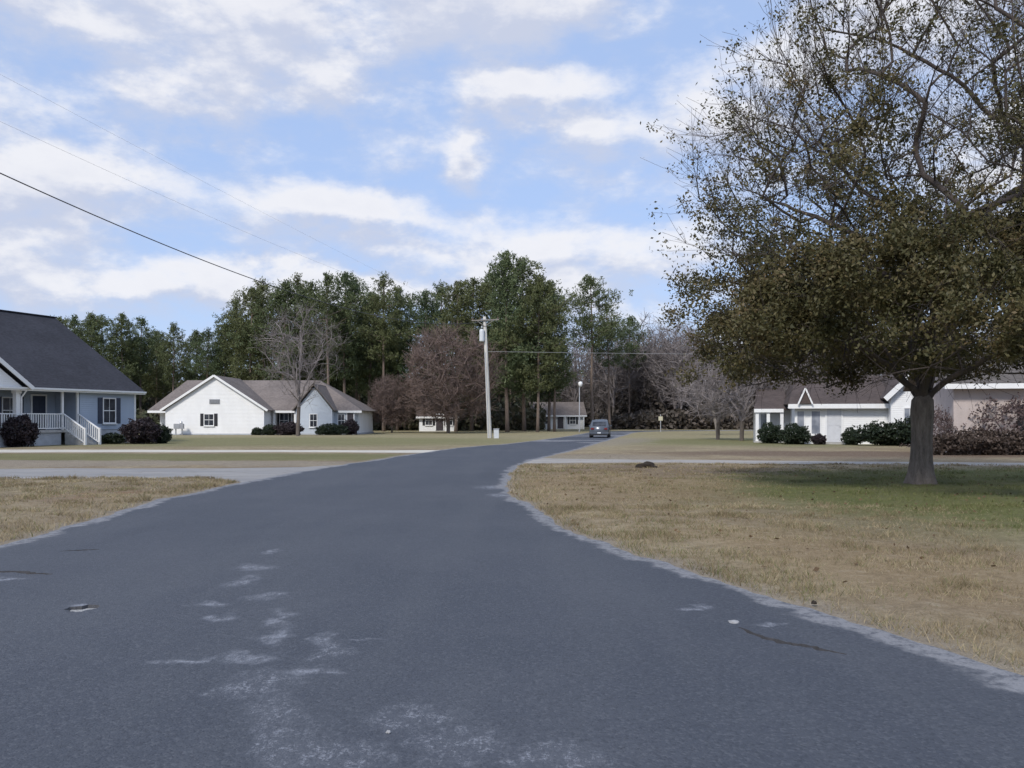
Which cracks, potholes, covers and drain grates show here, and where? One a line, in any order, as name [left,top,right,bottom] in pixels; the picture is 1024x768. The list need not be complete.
pothole [64,604,100,612]
crack [738,627,845,654]
